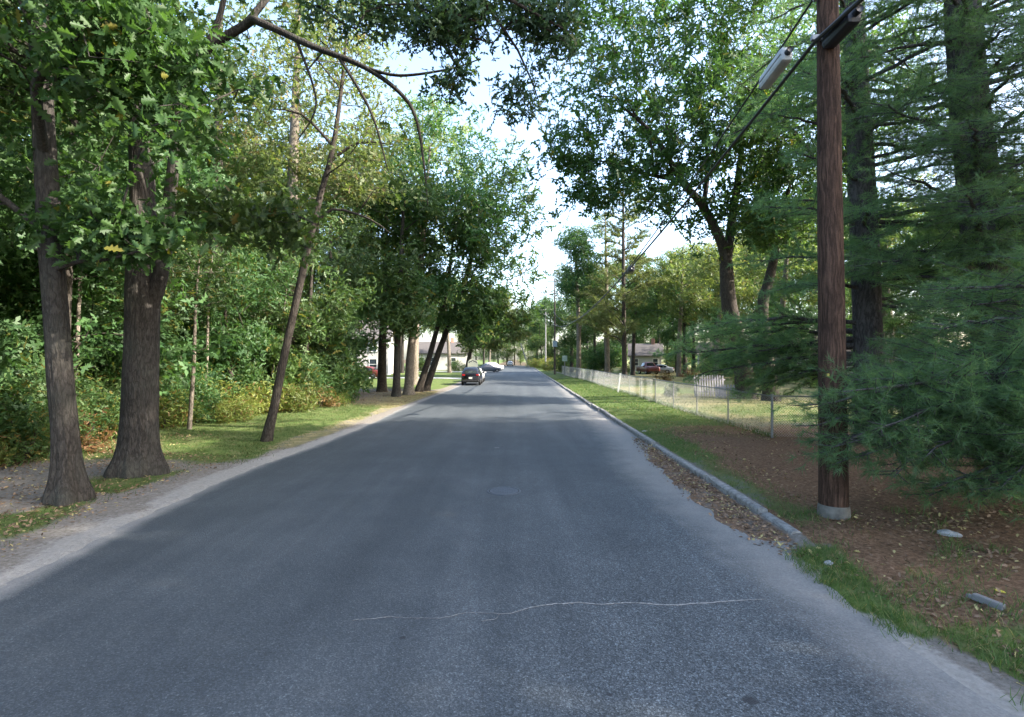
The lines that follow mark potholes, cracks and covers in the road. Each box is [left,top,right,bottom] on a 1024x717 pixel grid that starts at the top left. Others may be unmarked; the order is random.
manhole cover [487,487,521,496]
crack [352,599,766,622]
